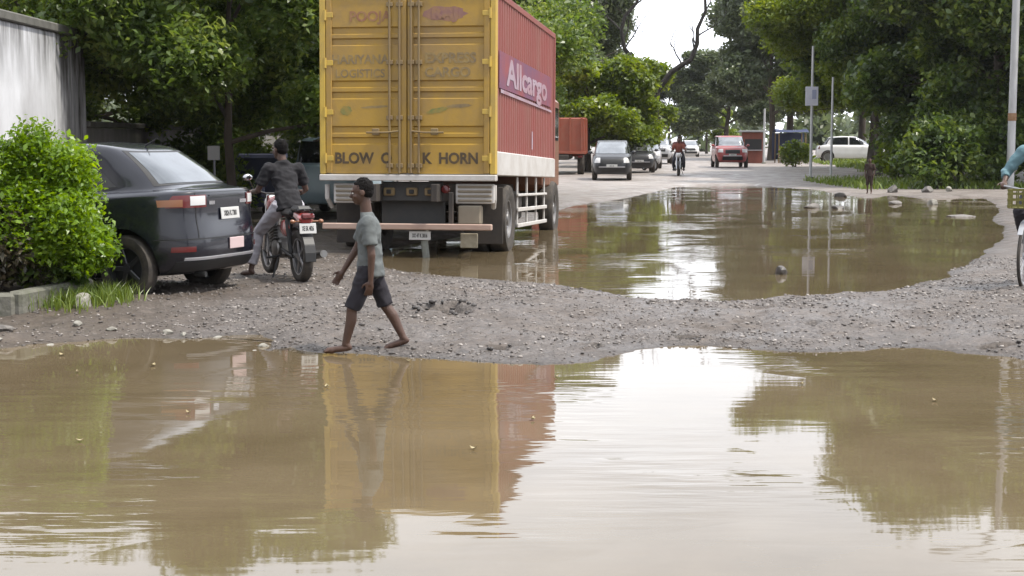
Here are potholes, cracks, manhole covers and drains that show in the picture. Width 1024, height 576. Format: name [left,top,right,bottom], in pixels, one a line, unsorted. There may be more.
pothole [0,331,1024,576]
pothole [403,298,484,316]
pothole [354,183,1015,302]
